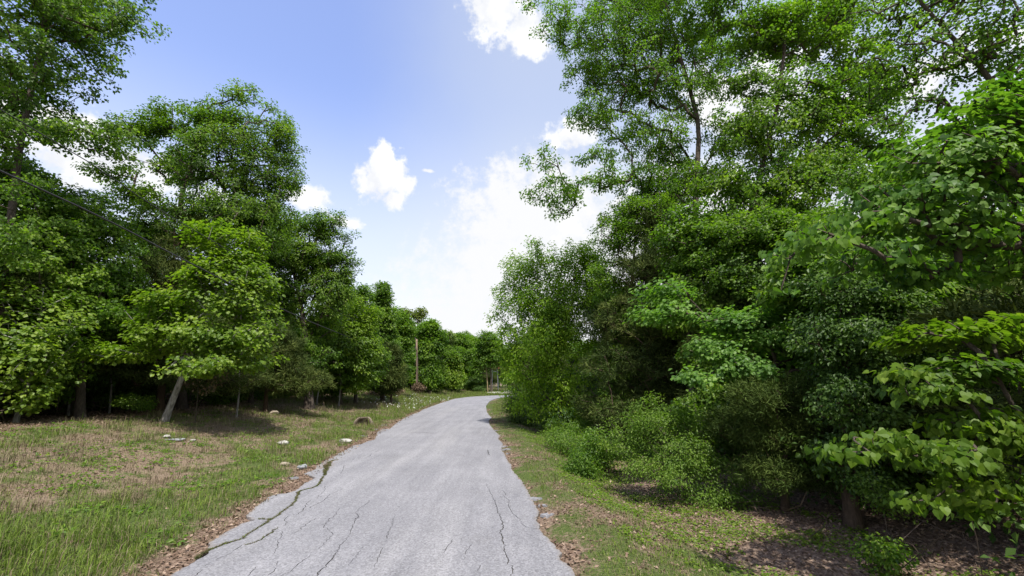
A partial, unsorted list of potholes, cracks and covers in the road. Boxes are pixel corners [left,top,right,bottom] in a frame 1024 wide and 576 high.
crack [195,492,366,576]
crack [489,490,535,574]
